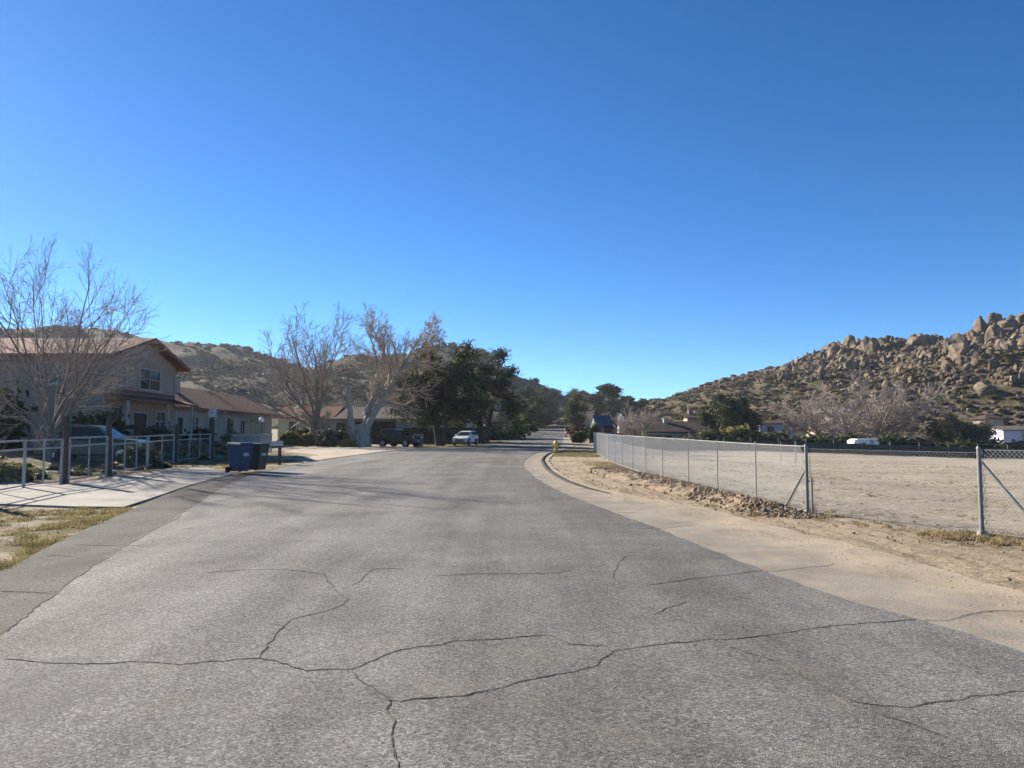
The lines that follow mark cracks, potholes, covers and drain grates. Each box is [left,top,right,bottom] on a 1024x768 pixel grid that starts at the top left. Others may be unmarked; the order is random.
crack [356,568,569,584]
crack [12,579,705,768]
crack [662,601,1024,748]
